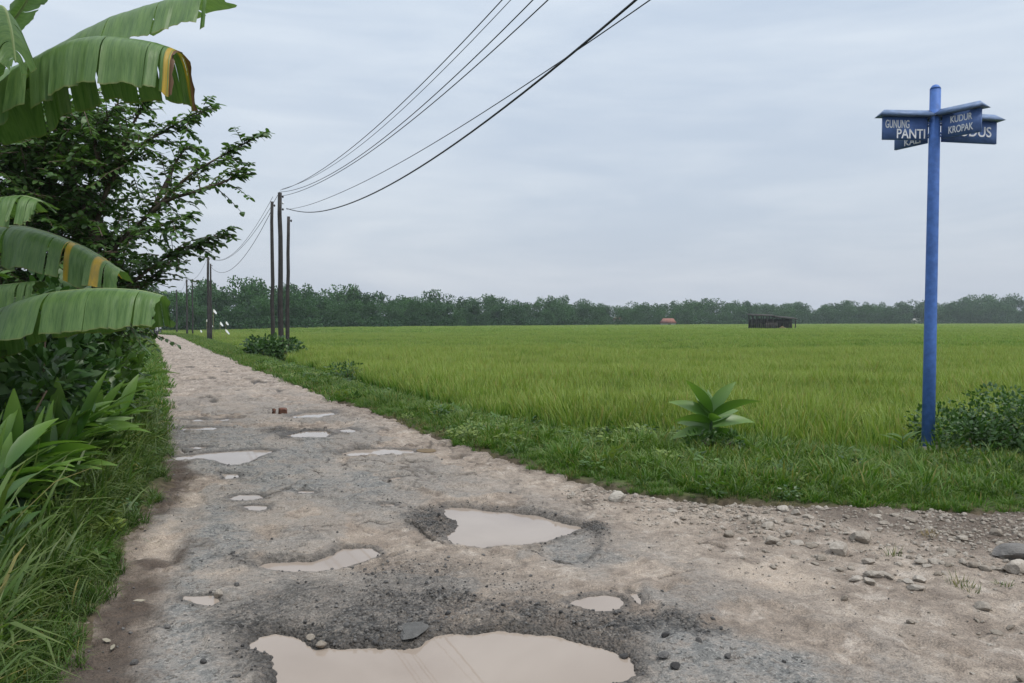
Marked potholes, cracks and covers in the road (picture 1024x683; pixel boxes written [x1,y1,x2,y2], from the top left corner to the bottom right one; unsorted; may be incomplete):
pothole [232,502,278,514]
pothole [275,429,341,439]
pothole [623,588,648,606]
pothole [167,424,233,432]
pothole [429,499,608,550]
pothole [326,443,424,457]
pothole [243,539,392,574]
pothole [223,613,662,683]
pothole [163,445,287,466]
pothole [172,592,231,608]
